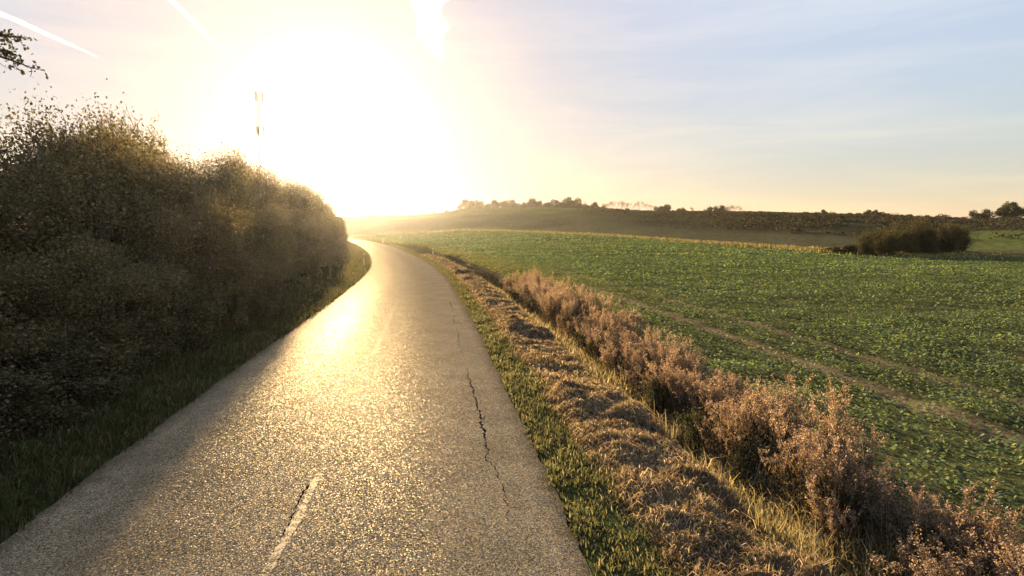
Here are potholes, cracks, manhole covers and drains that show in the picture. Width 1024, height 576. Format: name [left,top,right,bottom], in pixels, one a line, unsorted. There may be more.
crack [281,479,313,539]
crack [450,301,521,514]
